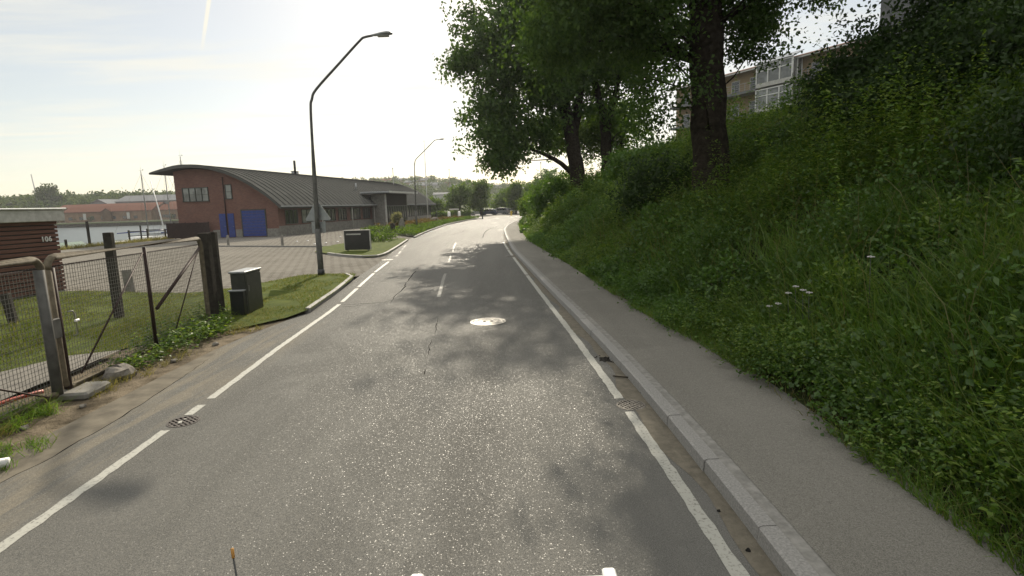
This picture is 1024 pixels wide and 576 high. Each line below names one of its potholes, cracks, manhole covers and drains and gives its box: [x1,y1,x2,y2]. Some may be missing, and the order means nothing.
drain grate [166,416,200,428]
manhole cover [470,318,506,326]
drain grate [616,400,646,410]
